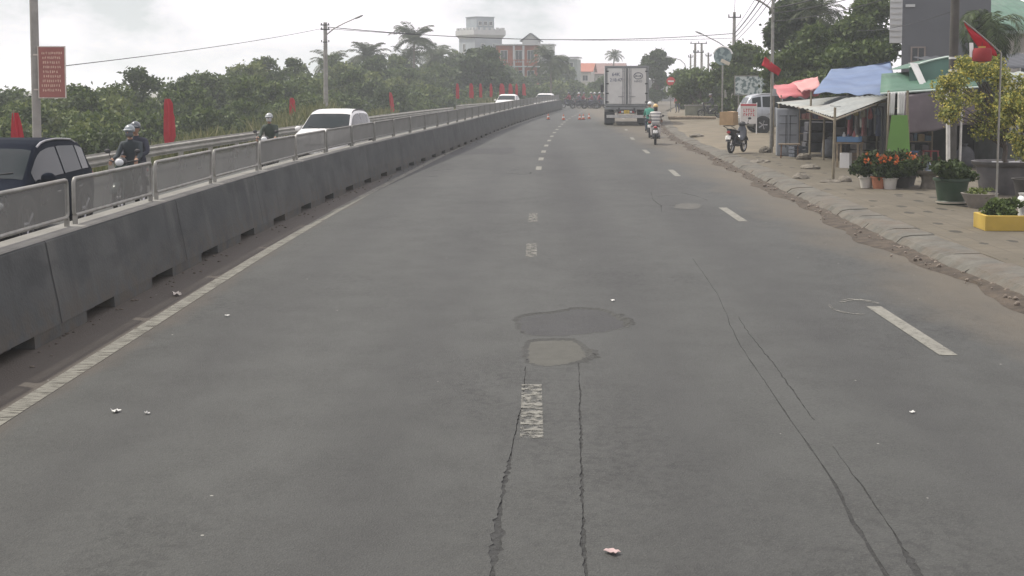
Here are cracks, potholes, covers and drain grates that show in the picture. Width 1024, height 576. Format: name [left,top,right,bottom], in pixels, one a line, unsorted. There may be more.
crack [578,363,588,576]
crack [488,367,526,576]
crack [693,259,923,576]
